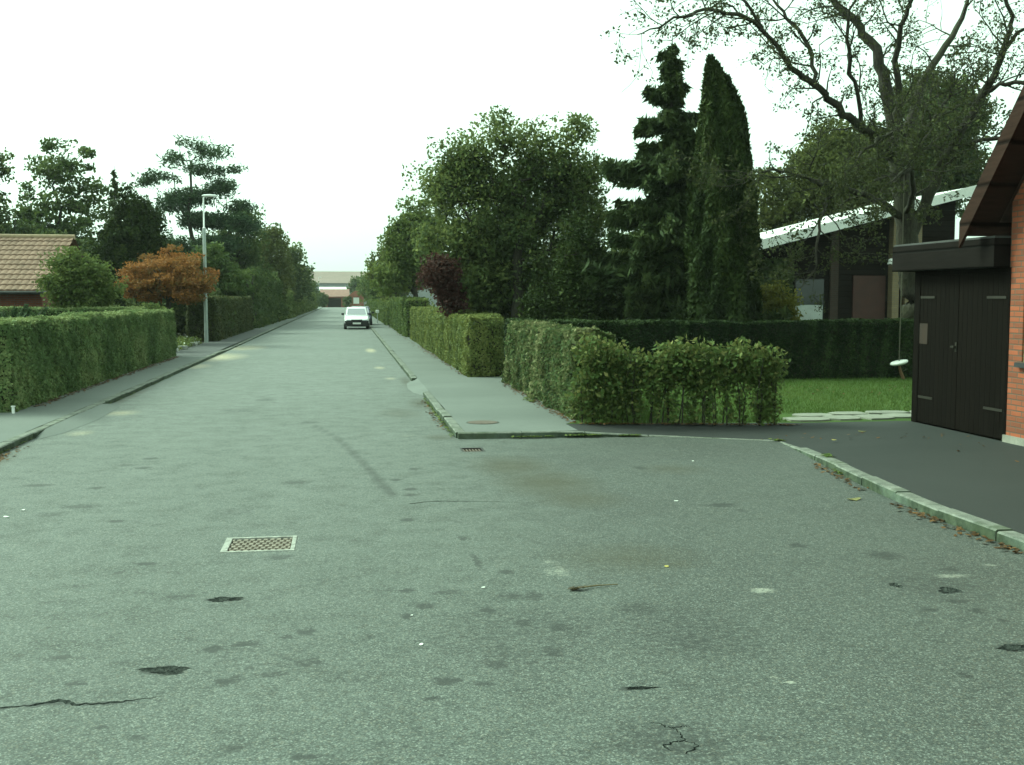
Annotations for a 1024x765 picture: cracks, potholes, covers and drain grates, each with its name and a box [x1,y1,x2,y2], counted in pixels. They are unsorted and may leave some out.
pothole [996,644,1024,652]
crack [647,721,699,754]
pothole [135,665,191,675]
crack [0,696,159,709]
